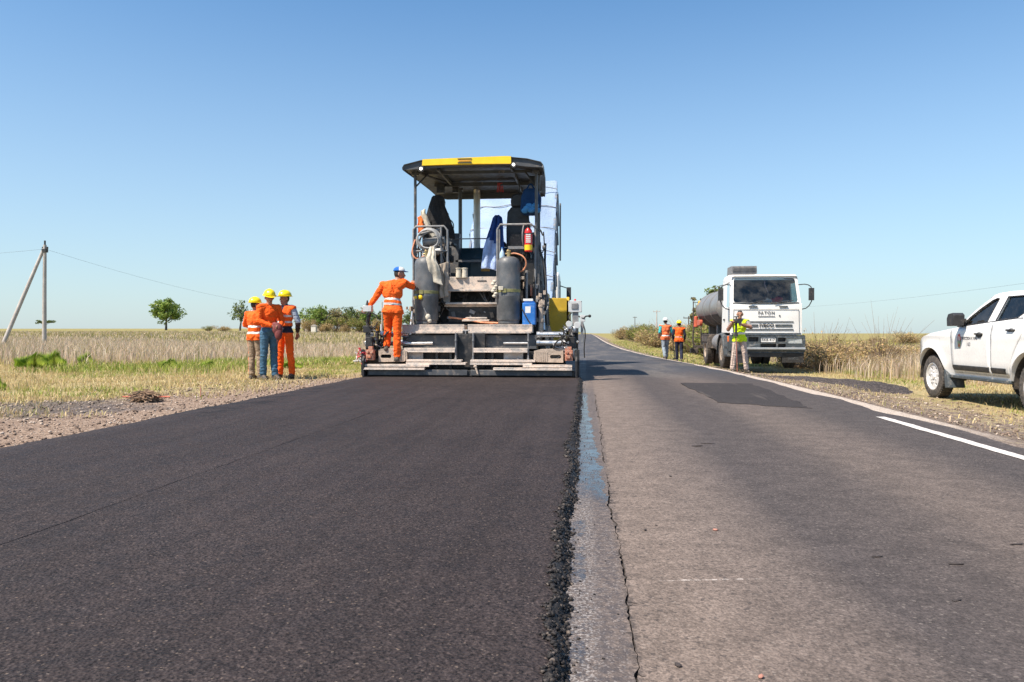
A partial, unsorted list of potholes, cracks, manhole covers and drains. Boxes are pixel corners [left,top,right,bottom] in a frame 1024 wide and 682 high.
crack [594,394,642,682]
